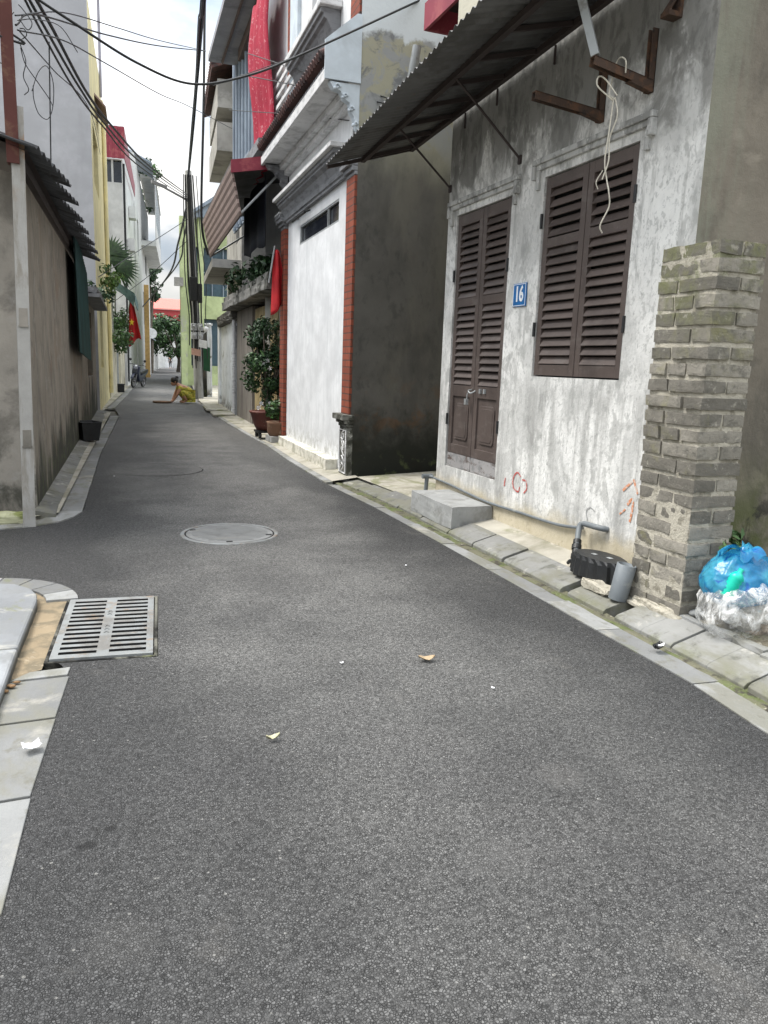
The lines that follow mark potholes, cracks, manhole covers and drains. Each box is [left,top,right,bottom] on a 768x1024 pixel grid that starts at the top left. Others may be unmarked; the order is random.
drain grate [43,596,158,670]
manhole cover [180,523,278,545]
